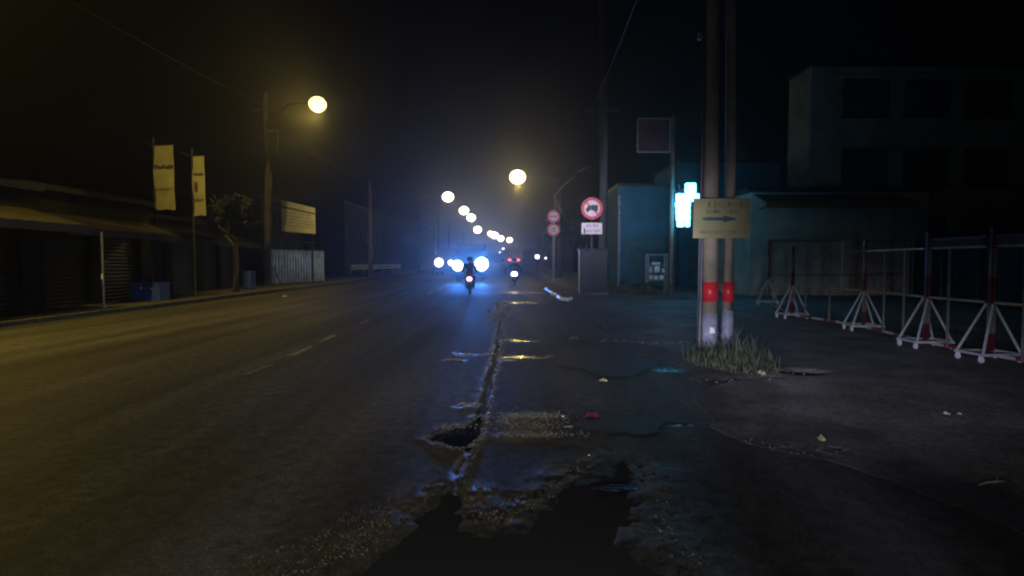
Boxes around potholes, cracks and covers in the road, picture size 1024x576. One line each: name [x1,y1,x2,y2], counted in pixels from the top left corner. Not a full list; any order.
pothole [425,414,488,452]
